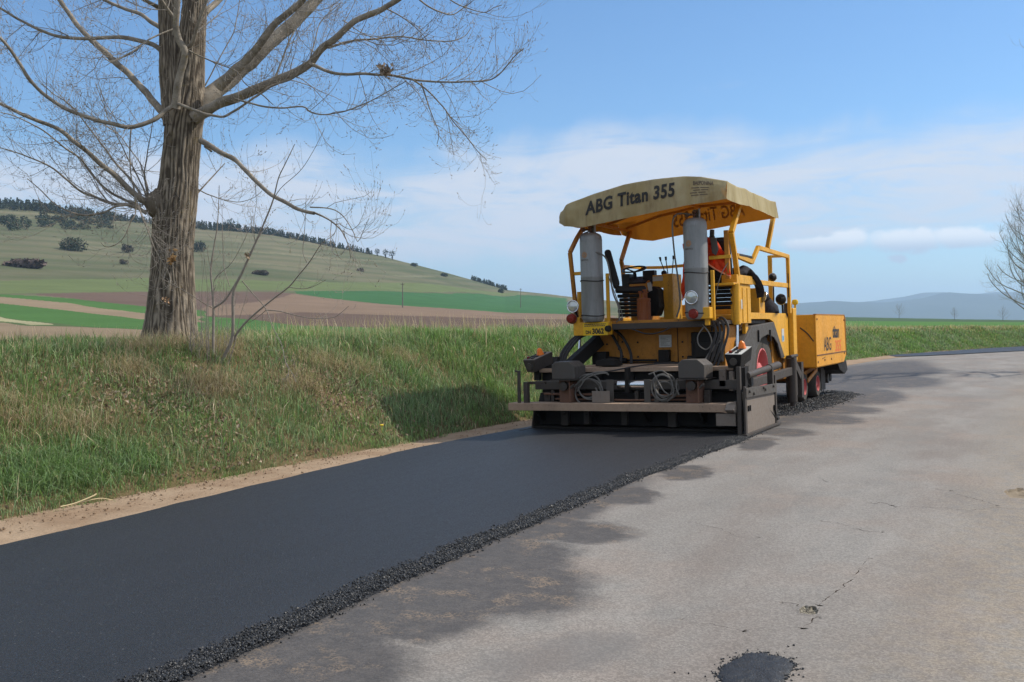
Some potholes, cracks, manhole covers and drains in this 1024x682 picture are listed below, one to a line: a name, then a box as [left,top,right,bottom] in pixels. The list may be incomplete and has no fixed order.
pothole [797,604,821,616]
crack [783,558,875,628]
